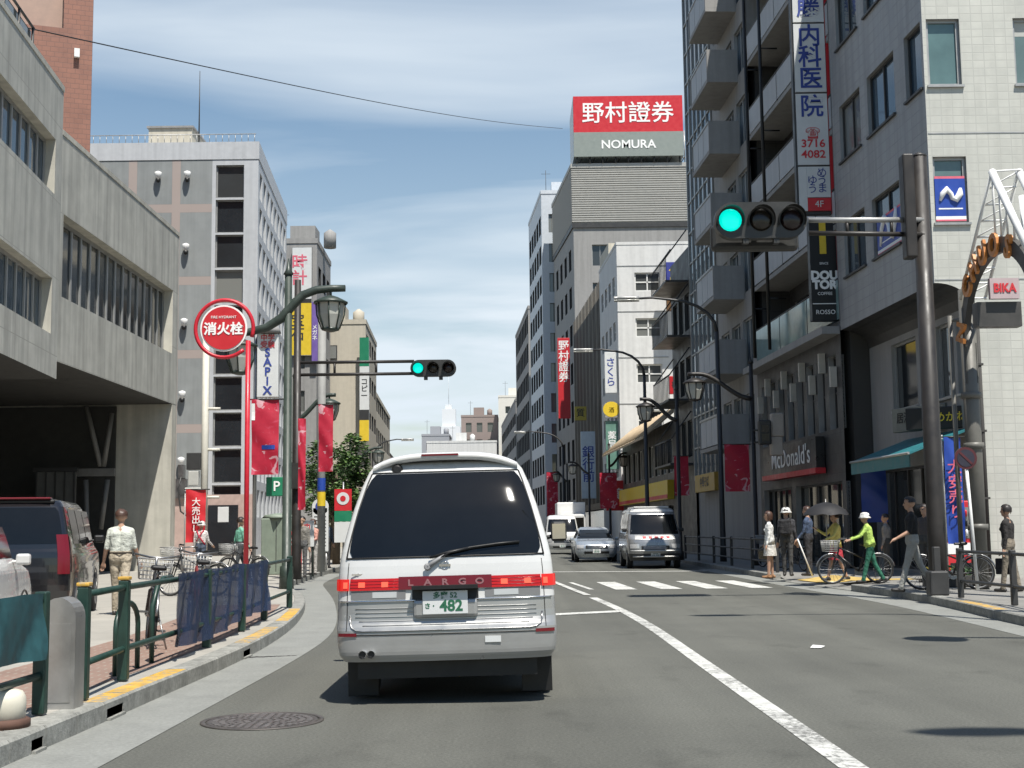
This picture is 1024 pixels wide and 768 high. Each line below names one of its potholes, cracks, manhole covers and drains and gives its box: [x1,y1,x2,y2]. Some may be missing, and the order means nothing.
manhole cover [200,712,324,730]
